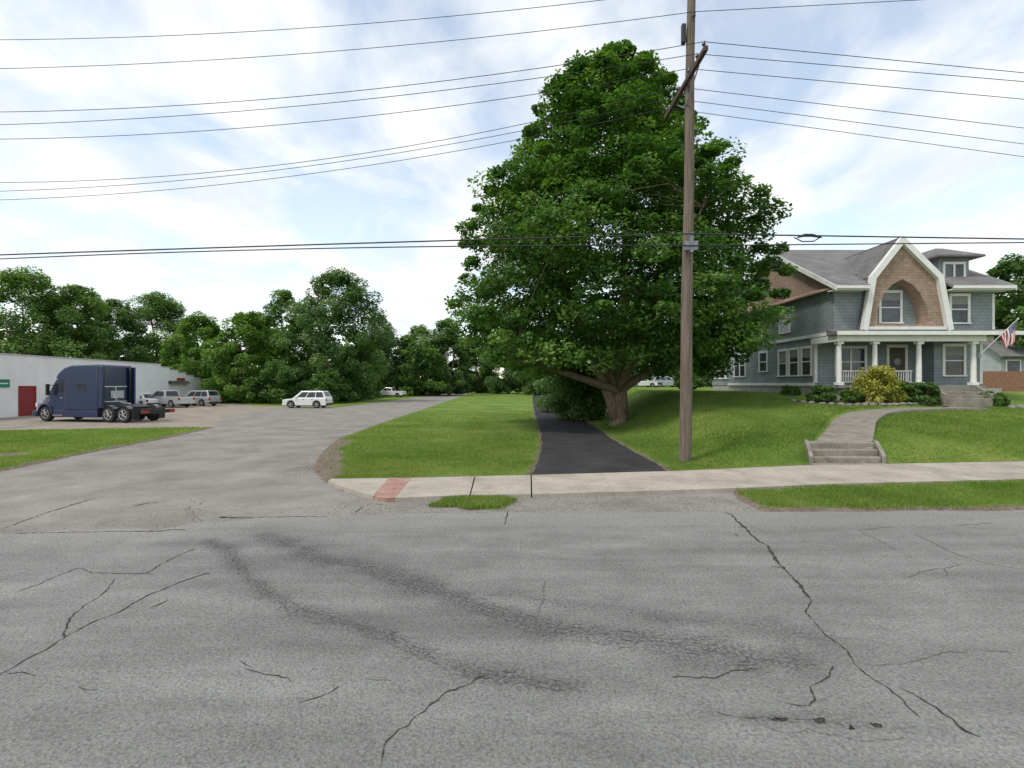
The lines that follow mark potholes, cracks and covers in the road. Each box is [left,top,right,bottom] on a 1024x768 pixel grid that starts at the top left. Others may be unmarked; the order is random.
crack [0,549,207,676]
